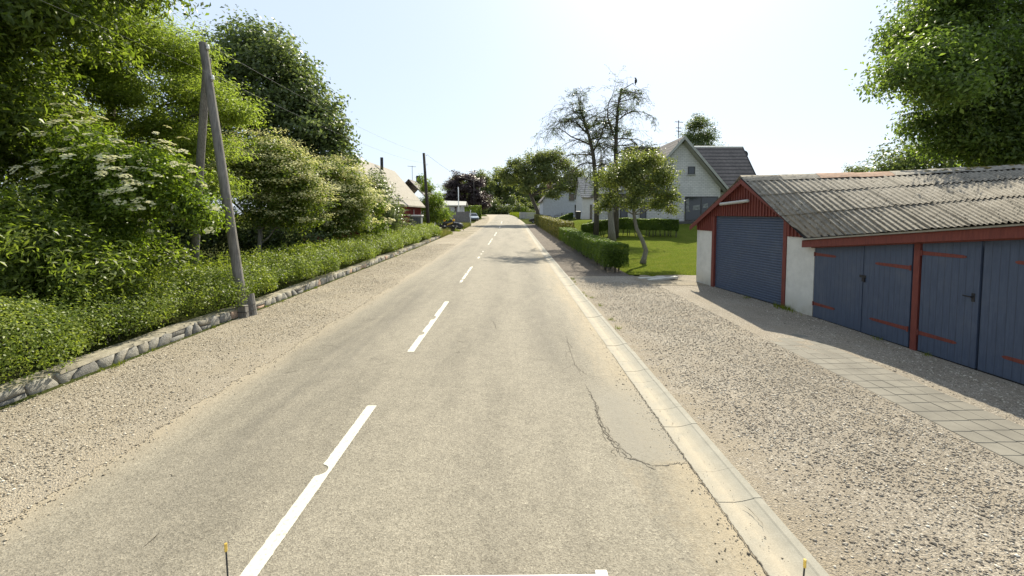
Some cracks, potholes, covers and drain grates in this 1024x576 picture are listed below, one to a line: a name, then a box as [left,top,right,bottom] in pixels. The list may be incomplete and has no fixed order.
crack [563,339,683,470]
